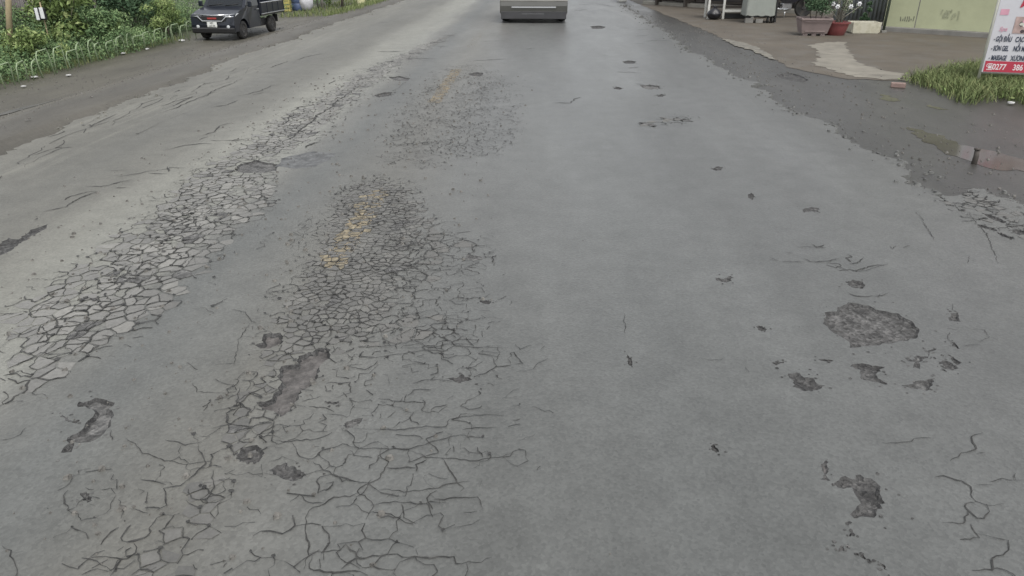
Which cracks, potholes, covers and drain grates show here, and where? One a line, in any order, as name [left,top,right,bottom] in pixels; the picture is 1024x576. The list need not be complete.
crack [770,245,910,272]
pothole [57,390,131,461]
pothole [799,301,936,354]
pothole [781,369,832,392]
pothole [269,463,326,485]
pothole [831,472,914,529]
pothole [235,442,265,464]
pothole [257,348,331,417]
pothole [235,160,277,173]
crack [897,163,1024,262]
pothole [849,363,887,387]
crack [0,34,553,576]
